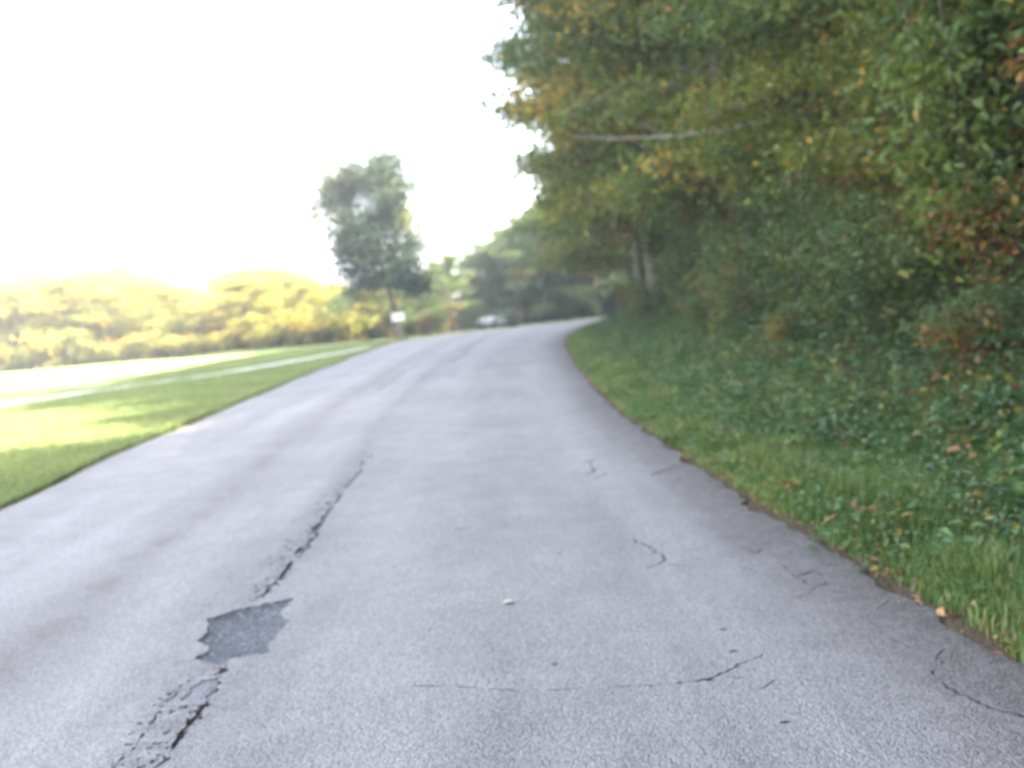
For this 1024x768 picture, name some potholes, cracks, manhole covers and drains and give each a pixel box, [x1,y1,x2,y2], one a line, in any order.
crack [630,538,709,569]
pothole [195,598,293,665]
crack [418,651,783,691]
crack [100,663,230,768]
crack [866,602,1024,718]
crack [248,454,373,601]
crack [733,540,844,599]
